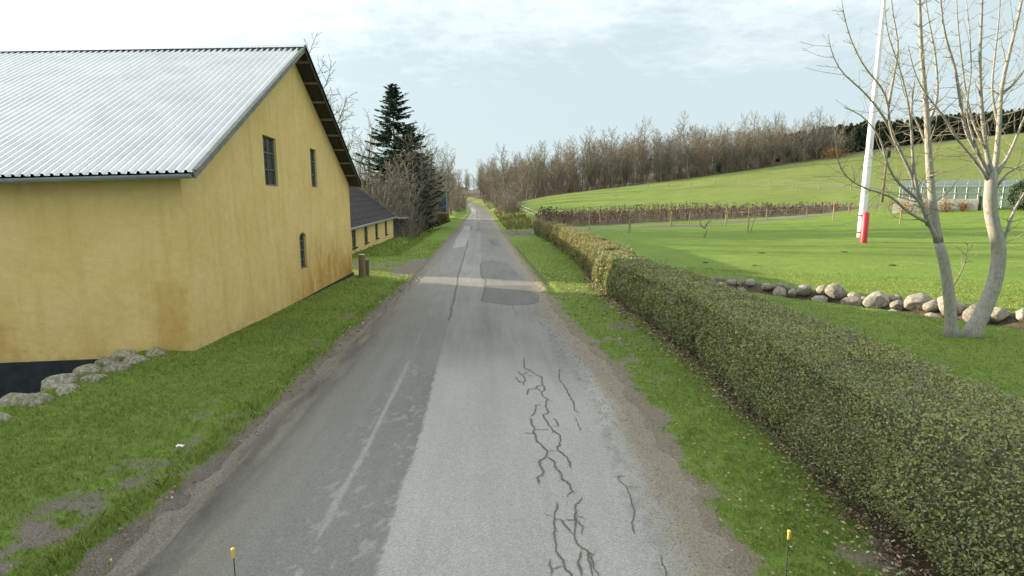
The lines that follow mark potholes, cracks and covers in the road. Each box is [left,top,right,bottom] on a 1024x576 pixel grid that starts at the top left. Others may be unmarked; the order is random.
crack [618,475,639,535]
crack [516,358,599,576]
